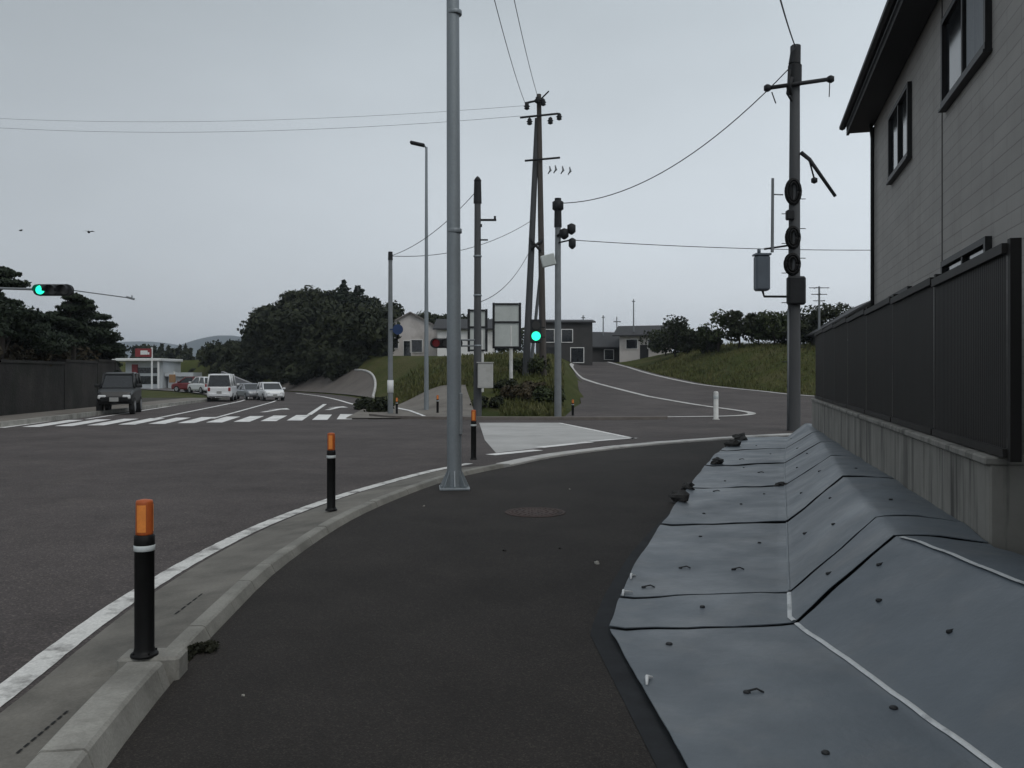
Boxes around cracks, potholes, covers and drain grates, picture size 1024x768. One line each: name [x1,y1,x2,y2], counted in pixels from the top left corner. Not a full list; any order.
manhole cover [505,507,566,517]
